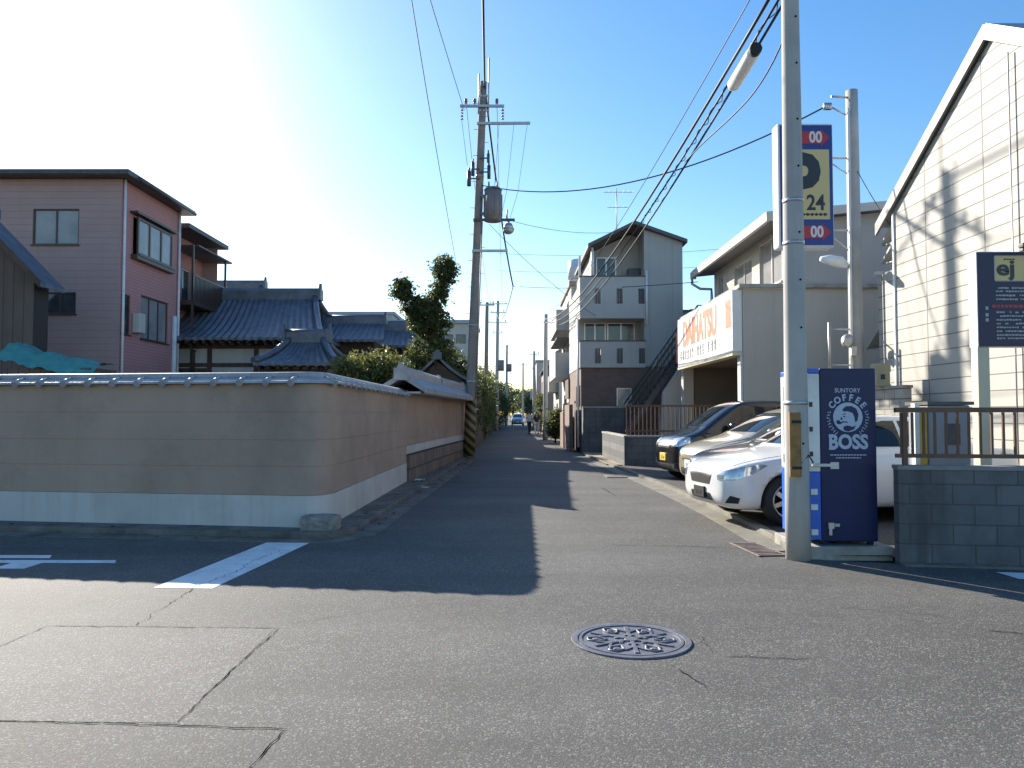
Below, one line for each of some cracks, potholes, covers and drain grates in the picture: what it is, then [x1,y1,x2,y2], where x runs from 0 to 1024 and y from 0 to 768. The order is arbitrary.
drain grate [729,542,785,557]
manhole cover [571,623,692,660]
